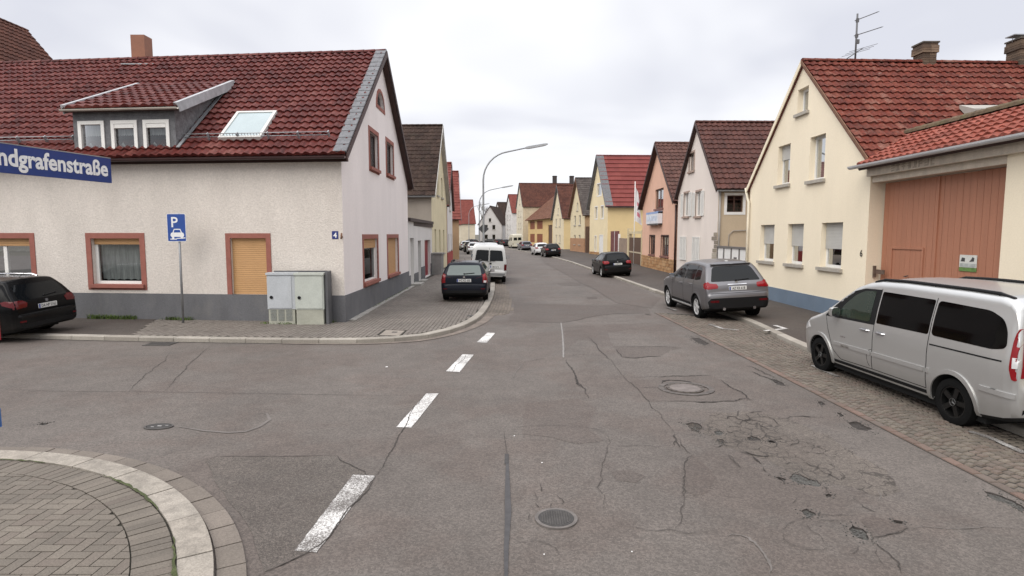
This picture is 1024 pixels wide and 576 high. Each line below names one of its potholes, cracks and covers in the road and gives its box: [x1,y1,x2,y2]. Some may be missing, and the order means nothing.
pothole [686,422,702,432]
pothole [790,474,821,487]
pothole [849,525,869,540]
pothole [848,421,872,431]
manhole cover [658,382,715,396]
crack [644,366,811,503]
crack [582,426,701,533]
crack [728,463,1020,574]
